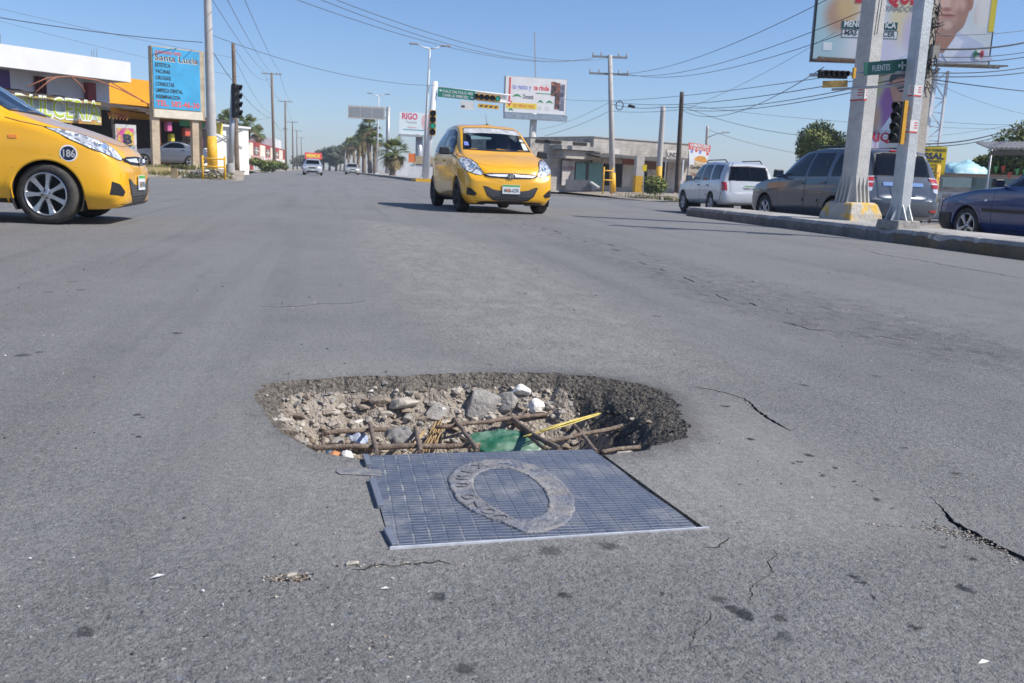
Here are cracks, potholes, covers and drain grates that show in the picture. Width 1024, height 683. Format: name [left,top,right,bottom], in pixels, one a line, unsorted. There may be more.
pothole [253,372,701,527]
crack [749,552,778,601]
crack [697,387,789,430]
crack [933,499,1024,561]
